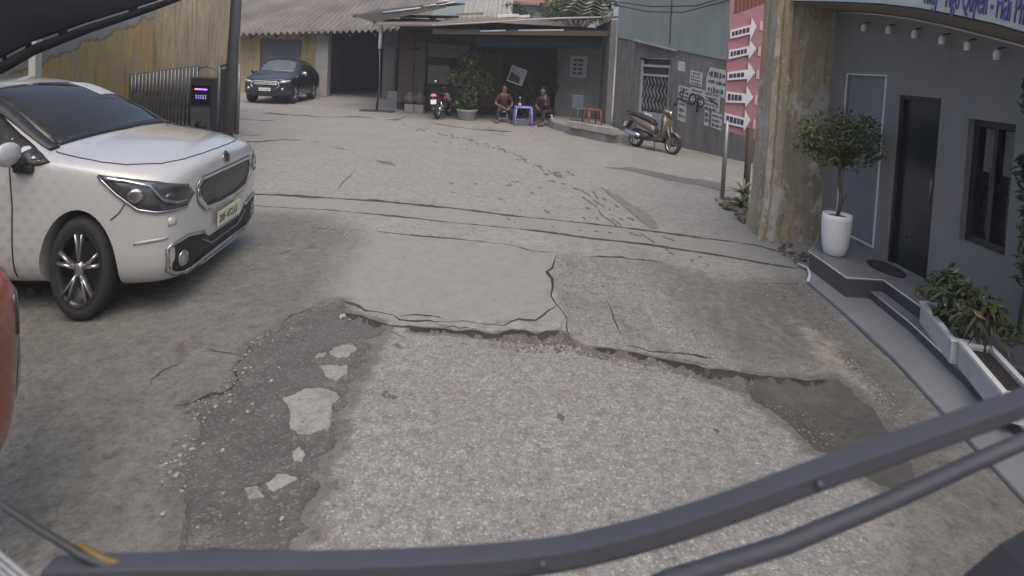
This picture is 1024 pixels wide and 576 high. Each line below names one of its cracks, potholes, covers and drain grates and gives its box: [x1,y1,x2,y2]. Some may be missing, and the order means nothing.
crack [143,307,316,406]
pothole [751,375,915,489]
crack [341,256,825,386]
pothole [177,299,387,551]
crack [434,123,511,132]
